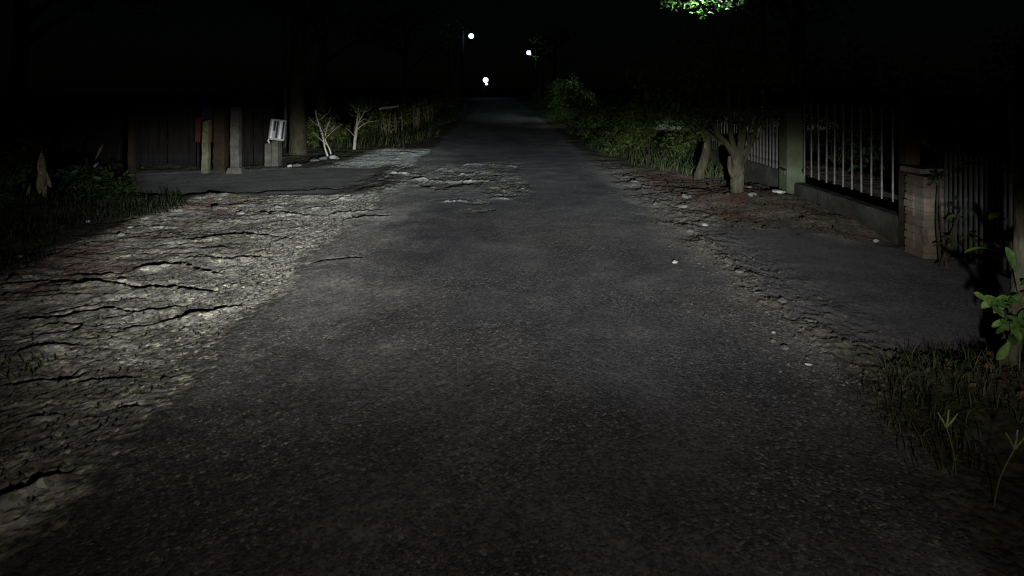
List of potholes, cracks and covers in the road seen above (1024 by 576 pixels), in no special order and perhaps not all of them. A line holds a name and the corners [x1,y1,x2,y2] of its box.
pothole [486,176,539,198]
pothole [480,161,531,173]
pothole [413,168,504,190]
pothole [430,196,495,205]
crack [0,186,396,387]
pothole [383,167,429,177]
crack [26,407,74,417]
crack [0,457,87,499]
crack [73,370,153,408]
pothole [462,206,499,214]
